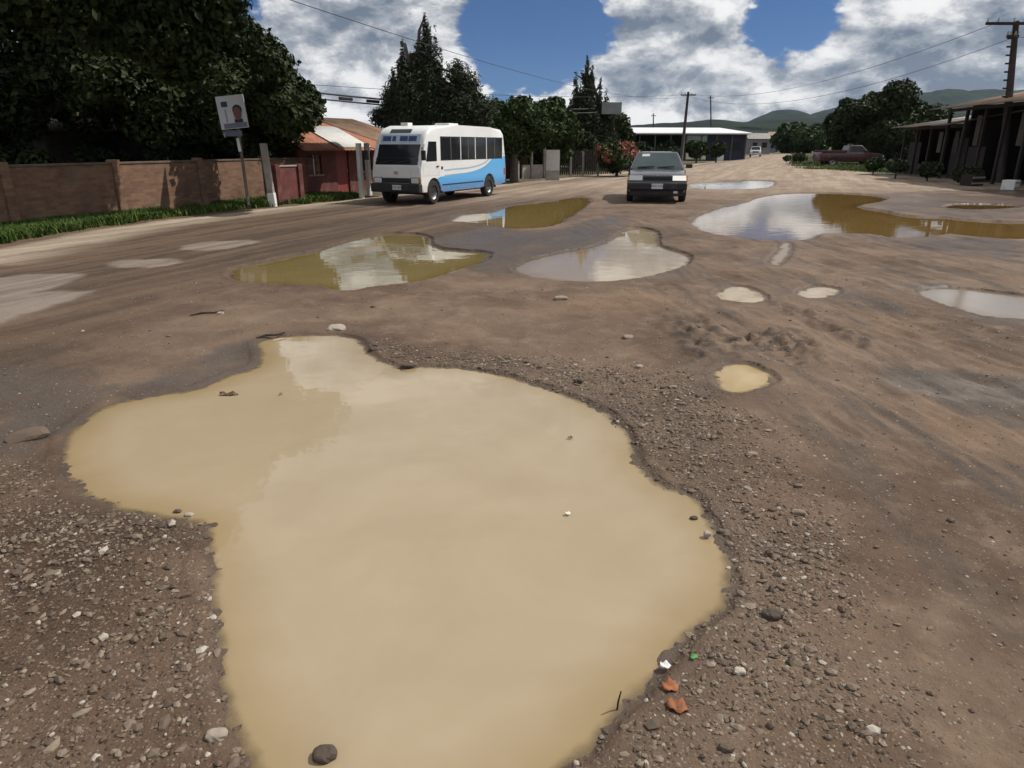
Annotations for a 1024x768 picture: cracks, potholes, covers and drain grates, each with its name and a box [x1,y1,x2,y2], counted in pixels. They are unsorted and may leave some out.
pothole [904,284,1024,320]
pothole [443,196,597,229]
pothole [682,191,1024,241]
pothole [687,180,780,190]
pothole [707,283,776,304]
pothole [505,226,700,283]
pothole [219,231,498,292]
pothole [701,358,789,396]
pothole [39,331,761,768]
pothole [786,283,850,300]
